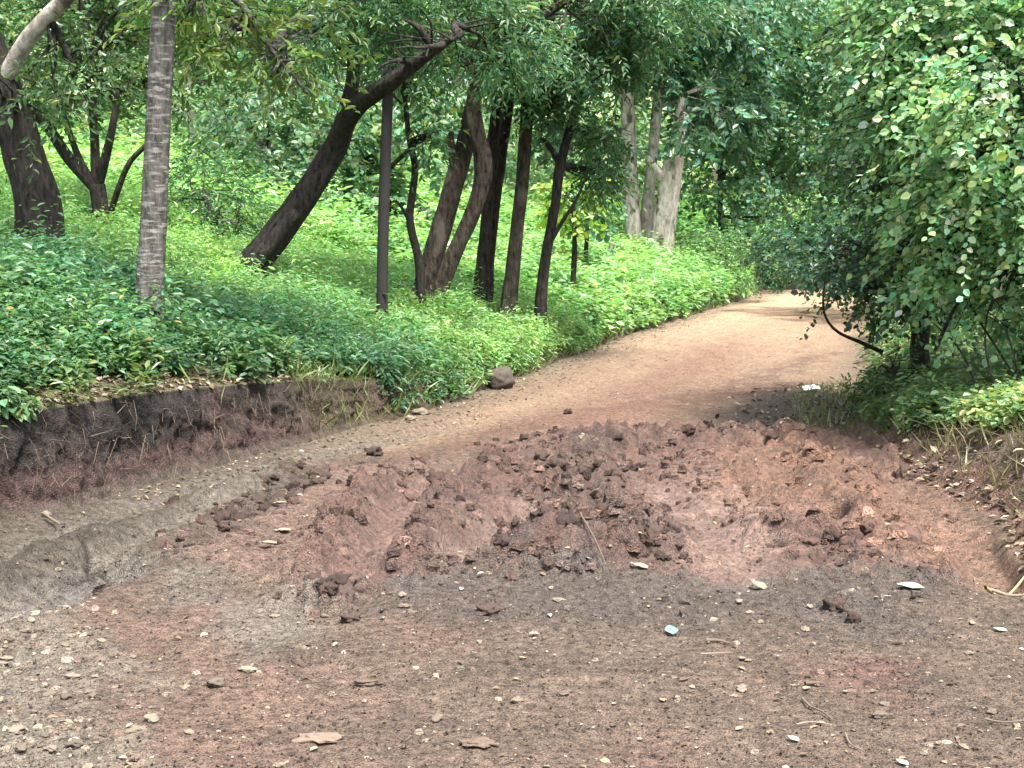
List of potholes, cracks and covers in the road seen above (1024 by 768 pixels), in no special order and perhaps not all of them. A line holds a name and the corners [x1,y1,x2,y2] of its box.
pothole [266,417,1024,607]
